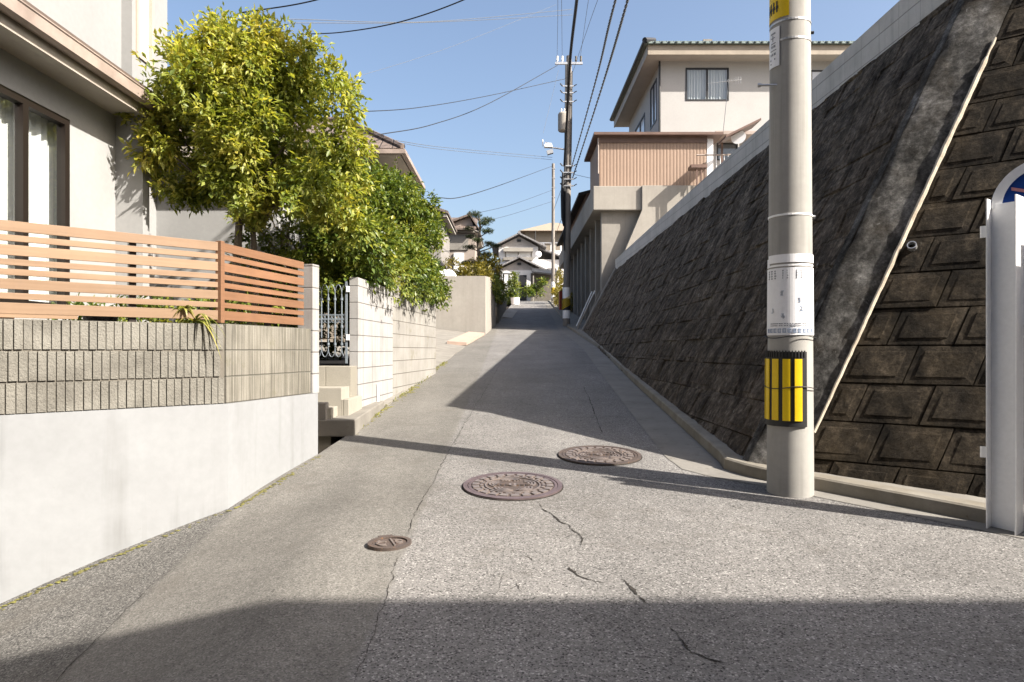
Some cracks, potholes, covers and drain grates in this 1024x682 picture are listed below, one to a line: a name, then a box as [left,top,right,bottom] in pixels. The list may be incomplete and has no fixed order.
crack [624,580,653,607]
utility cover [367,534,412,552]
manhole cover [557,445,642,466]
manhole cover [462,472,564,501]
crack [538,502,584,544]
crack [671,617,741,662]
crack [354,341,513,682]
